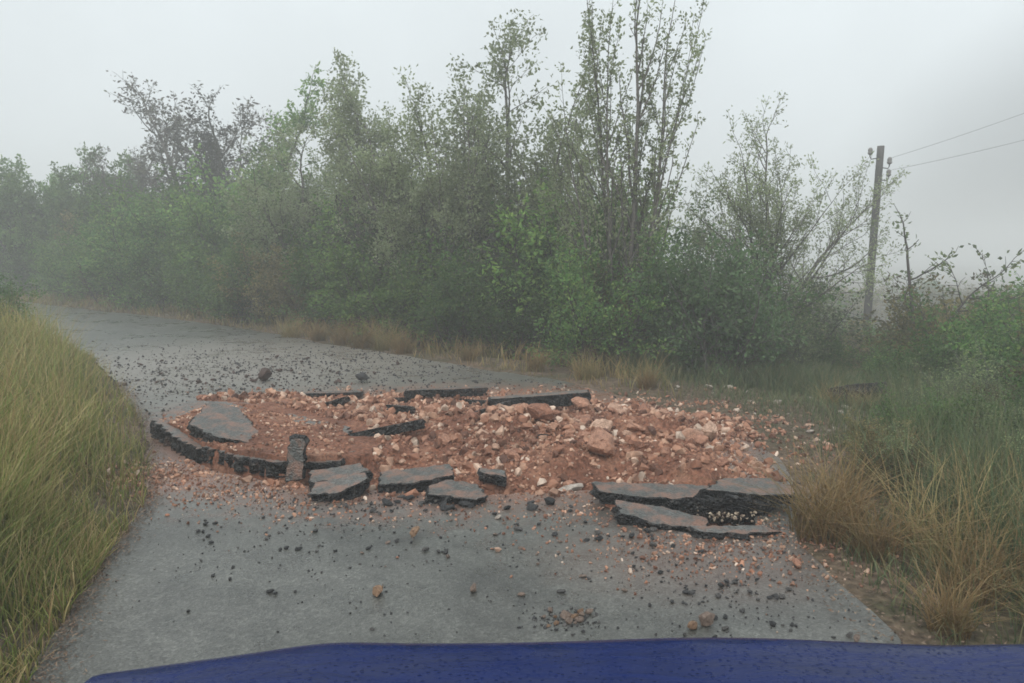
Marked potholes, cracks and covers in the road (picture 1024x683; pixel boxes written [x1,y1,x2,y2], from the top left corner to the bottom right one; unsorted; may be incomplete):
pothole [179,397,756,525]
